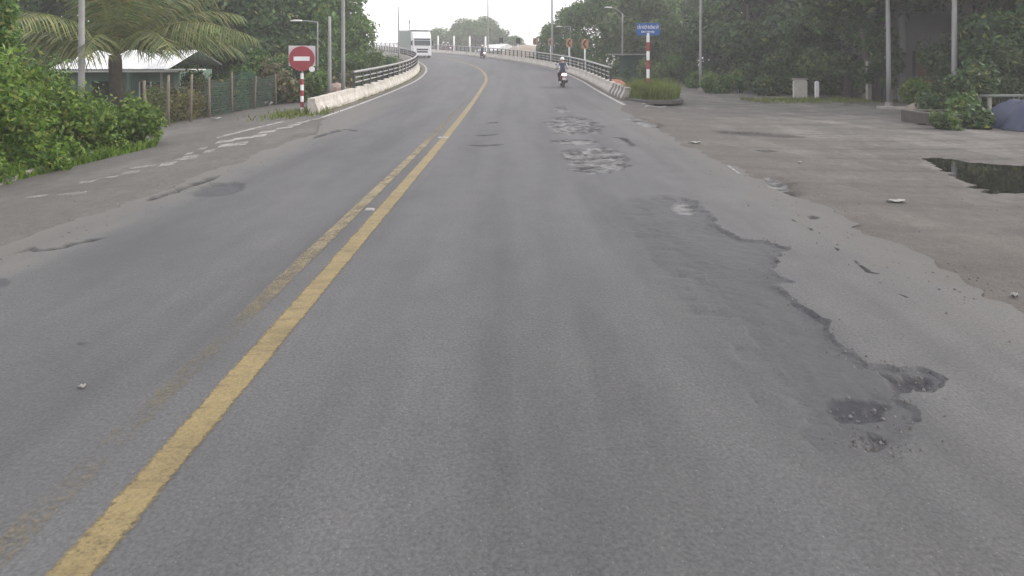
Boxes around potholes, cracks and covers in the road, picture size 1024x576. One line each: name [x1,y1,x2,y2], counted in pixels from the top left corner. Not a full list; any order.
crack [142,174,222,203]
crack [11,237,110,254]
pothole [542,116,605,136]
pothole [559,146,633,175]
crack [614,137,637,147]
crack [311,129,361,139]
crack [465,122,505,146]
